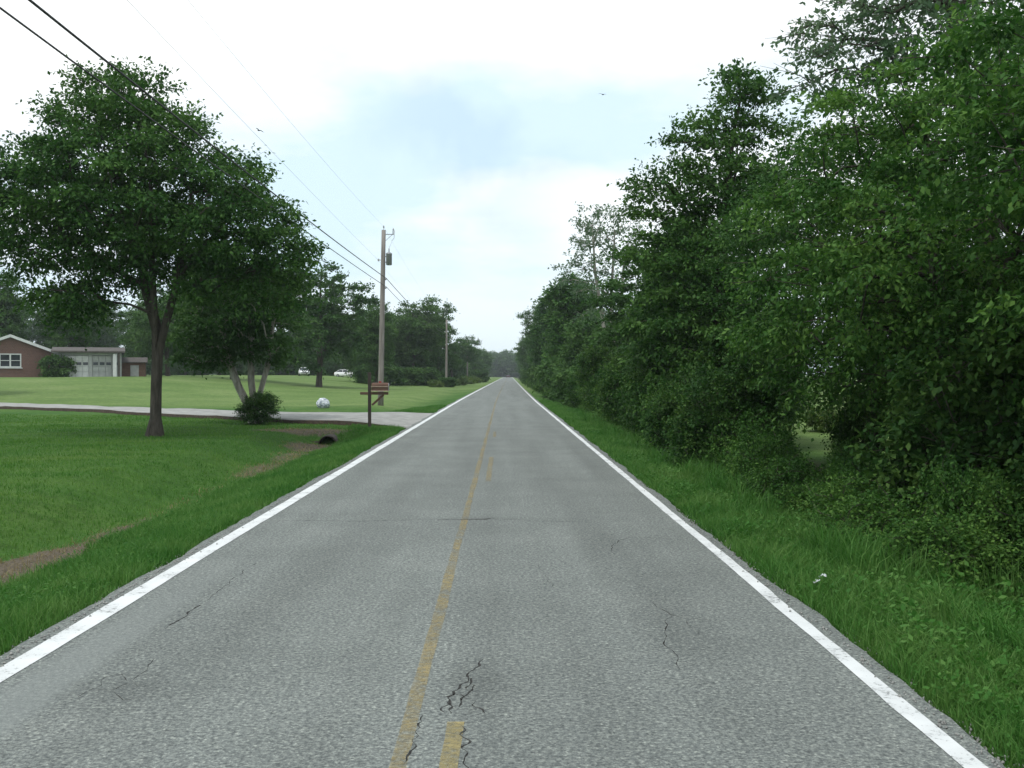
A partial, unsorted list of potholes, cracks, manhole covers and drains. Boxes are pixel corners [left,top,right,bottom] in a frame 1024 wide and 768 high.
crack [169,563,256,626]
crack [650,600,707,670]
crack [440,659,485,768]
crack [80,659,154,700]
